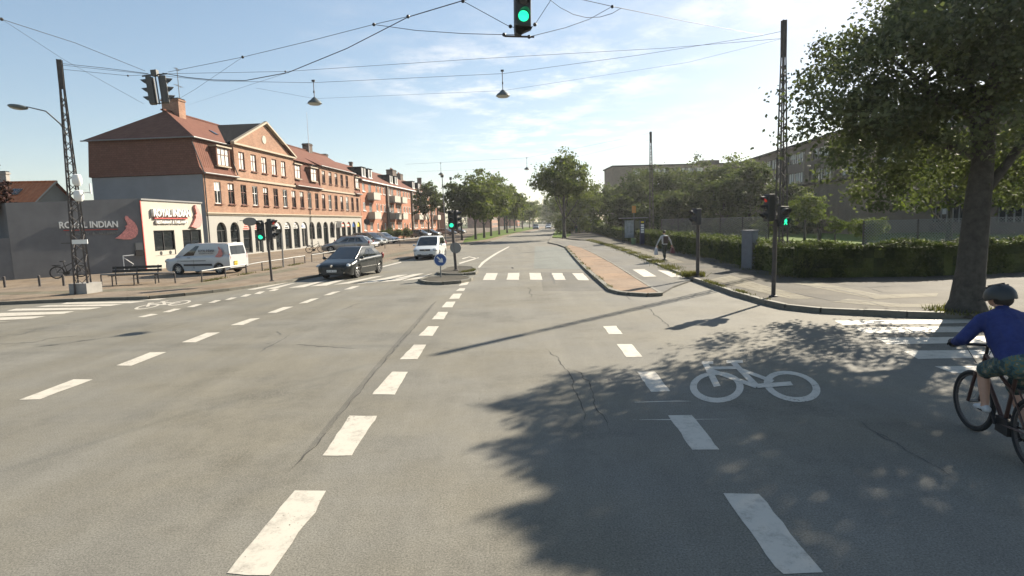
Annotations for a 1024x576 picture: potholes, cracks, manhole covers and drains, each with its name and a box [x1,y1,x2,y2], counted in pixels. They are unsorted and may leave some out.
crack [262,331,343,351]
crack [549,351,607,432]
crack [848,420,970,486]
